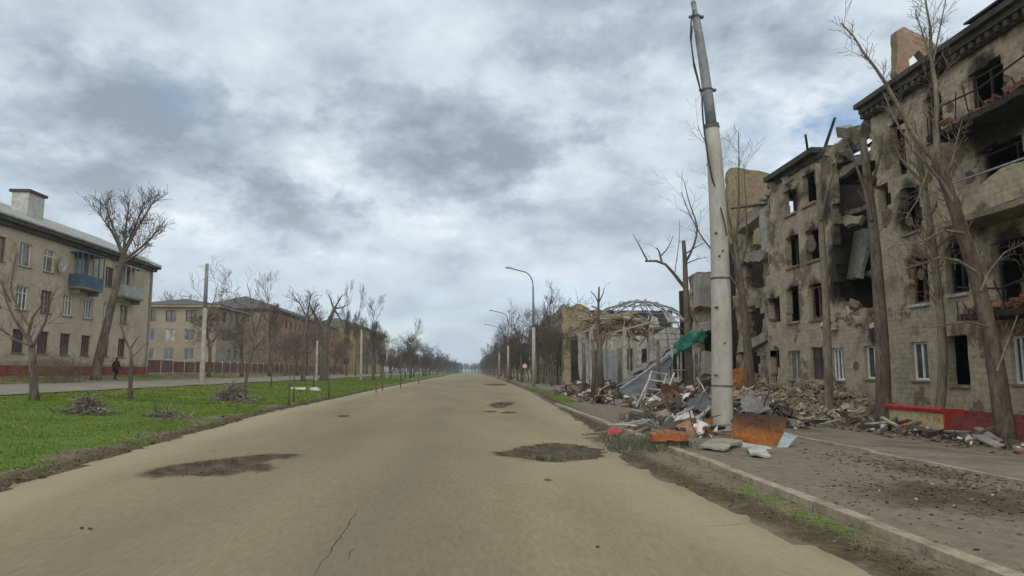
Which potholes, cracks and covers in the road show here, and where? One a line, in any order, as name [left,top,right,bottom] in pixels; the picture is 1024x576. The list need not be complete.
pothole [491,443,608,462]
crack [313,510,358,576]
pothole [145,454,297,477]
